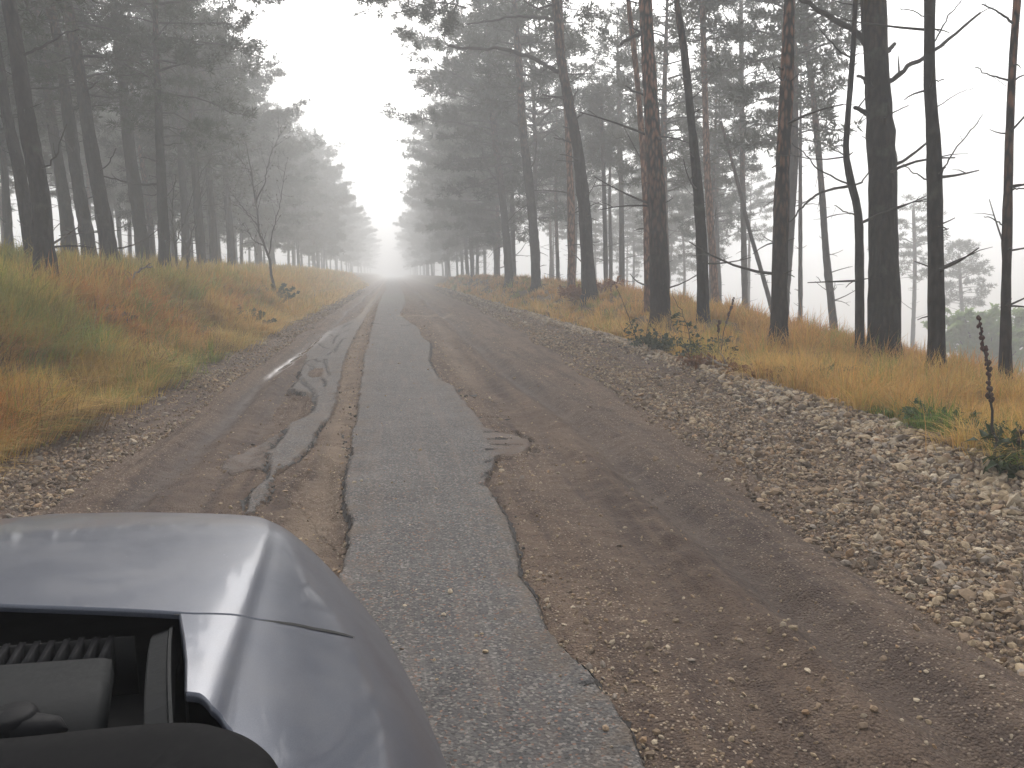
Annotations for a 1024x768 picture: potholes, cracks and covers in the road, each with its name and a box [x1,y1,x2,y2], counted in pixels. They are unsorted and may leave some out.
crack [240,324,353,567]
